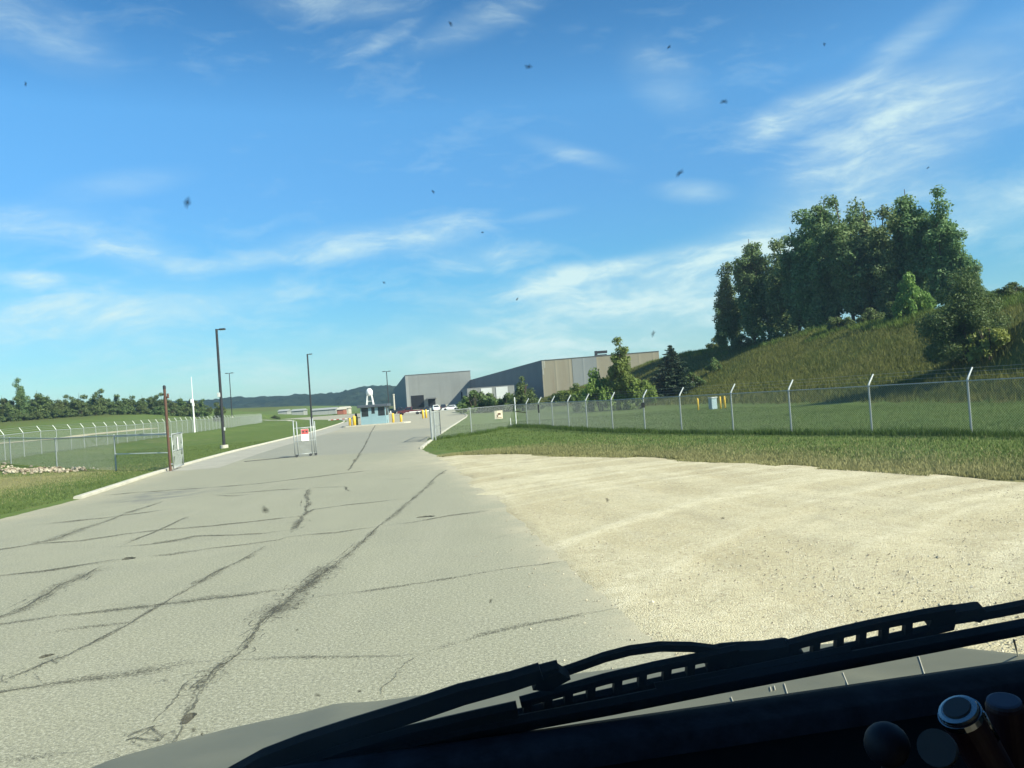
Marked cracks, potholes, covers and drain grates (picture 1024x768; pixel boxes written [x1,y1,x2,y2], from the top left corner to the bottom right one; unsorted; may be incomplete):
pothole [181,712,197,724]
crack [0,471,608,746]
